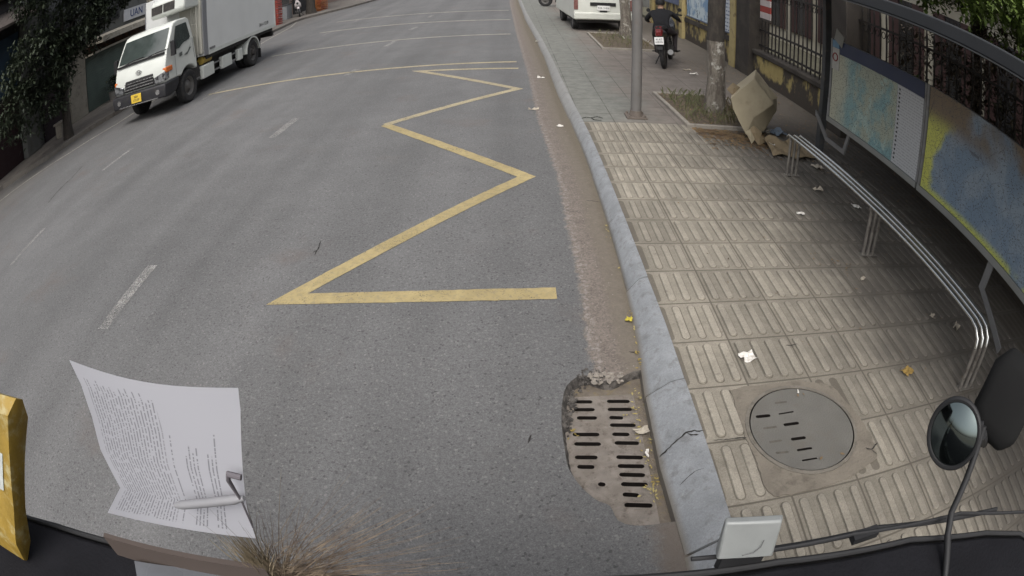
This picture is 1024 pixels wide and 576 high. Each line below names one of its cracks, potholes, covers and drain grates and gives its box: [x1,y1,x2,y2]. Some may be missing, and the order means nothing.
manhole cover [745,385,857,474]
drain grate [562,394,660,526]
